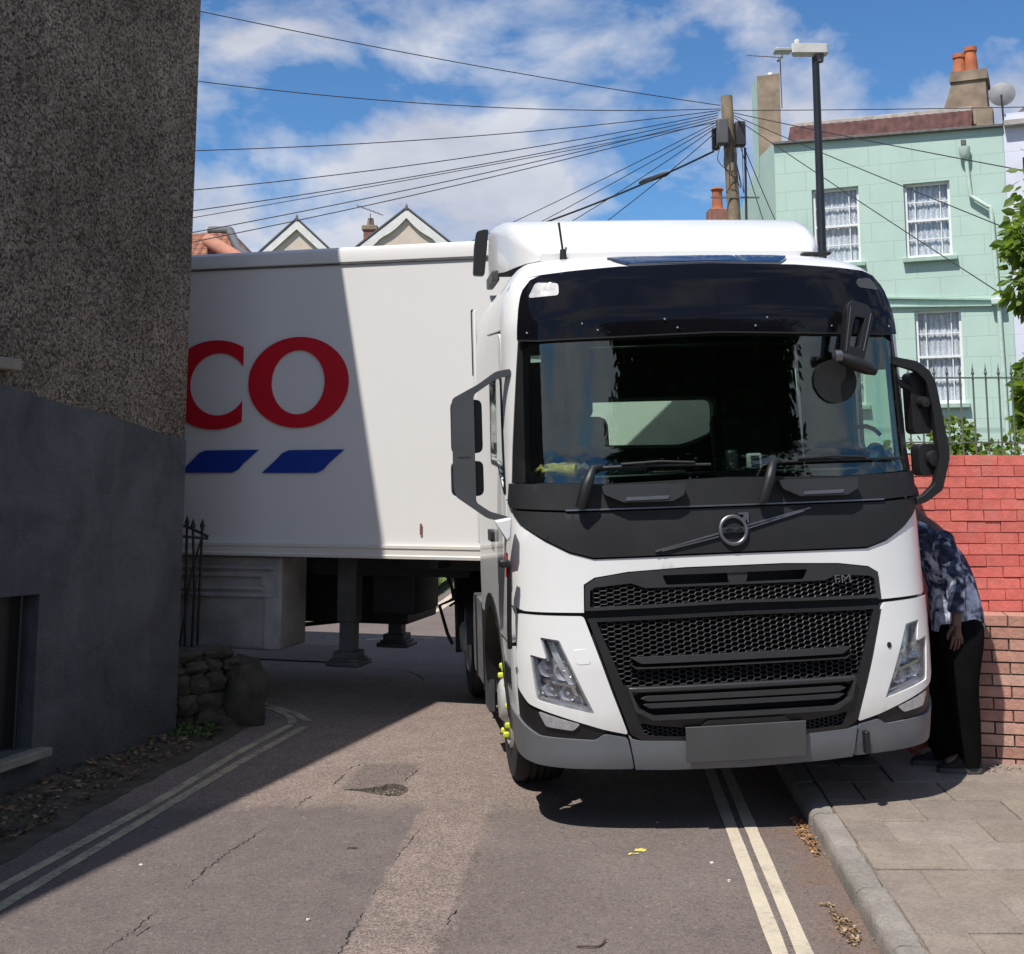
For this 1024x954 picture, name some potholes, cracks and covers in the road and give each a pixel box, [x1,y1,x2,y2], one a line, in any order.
pothole [345,784,408,796]
crack [104,911,158,951]
crack [185,829,263,889]
